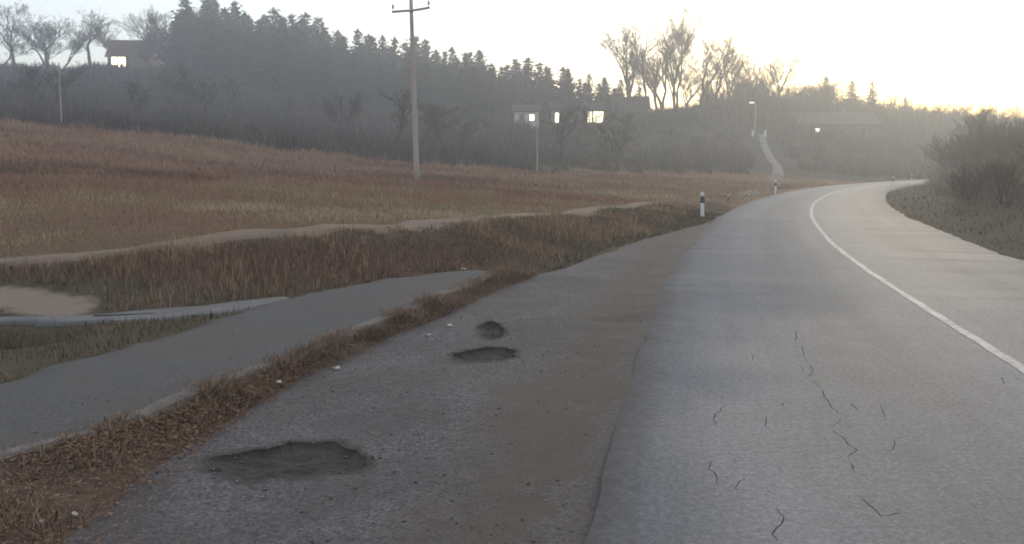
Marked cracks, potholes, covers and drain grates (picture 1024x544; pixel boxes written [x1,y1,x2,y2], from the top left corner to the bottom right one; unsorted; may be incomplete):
pothole [477,320,506,340]
pothole [449,346,518,362]
crack [794,331,869,480]
pothole [207,440,375,483]
